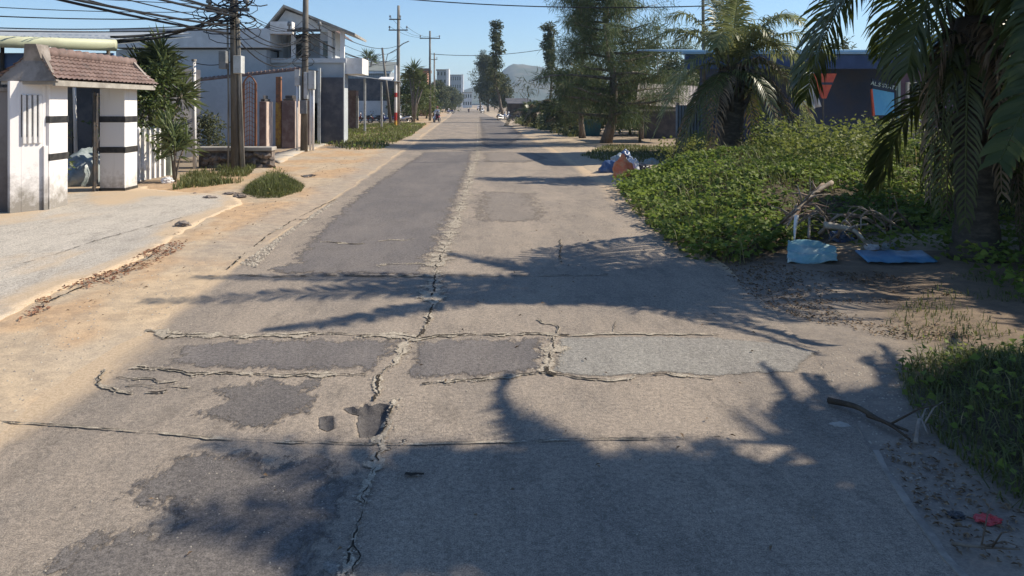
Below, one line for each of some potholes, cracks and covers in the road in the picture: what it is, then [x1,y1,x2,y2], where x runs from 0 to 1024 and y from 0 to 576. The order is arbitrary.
crack [145,300,720,384]
pothole [344,403,390,438]
crack [95,365,405,443]
crack [347,545,368,576]
pothole [319,416,334,431]
